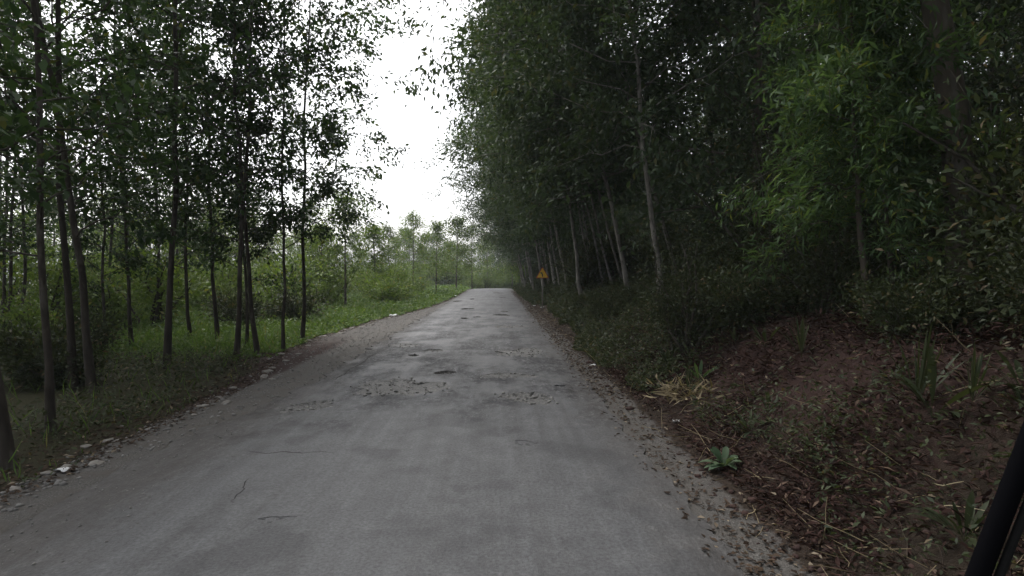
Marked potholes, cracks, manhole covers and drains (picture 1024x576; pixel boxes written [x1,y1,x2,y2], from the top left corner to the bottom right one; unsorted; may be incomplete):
pothole [493,347,547,357]
pothole [350,376,452,396]
pothole [494,391,559,405]
pothole [275,399,335,413]
